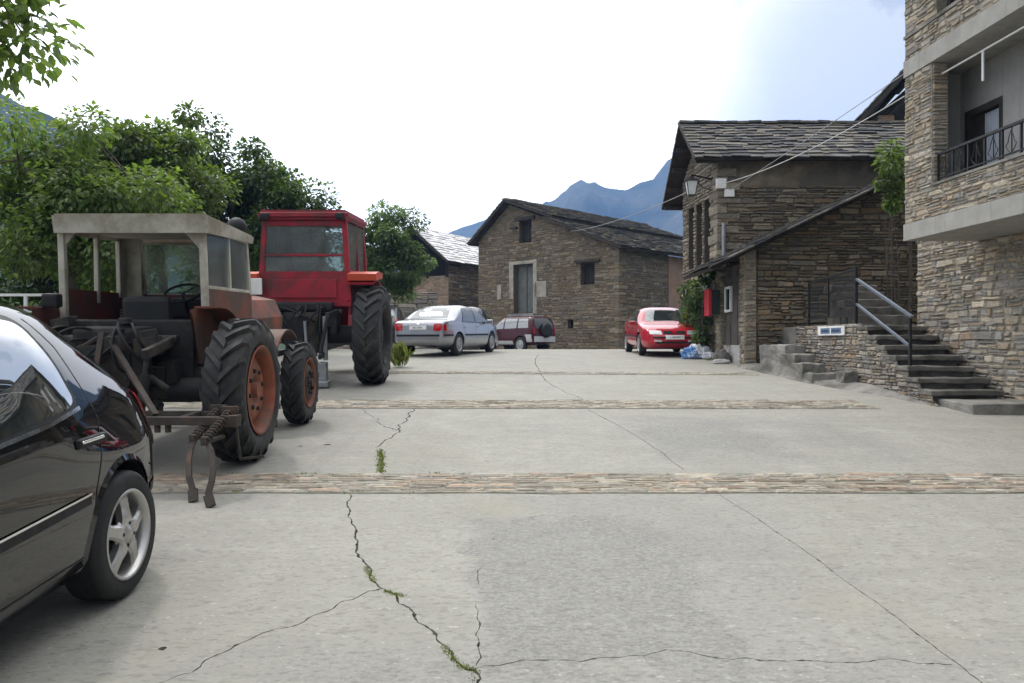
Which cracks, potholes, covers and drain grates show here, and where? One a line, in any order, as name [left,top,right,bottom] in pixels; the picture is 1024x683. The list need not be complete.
crack [364,409,415,473]
crack [535,356,683,469]
crack [159,495,952,683]
